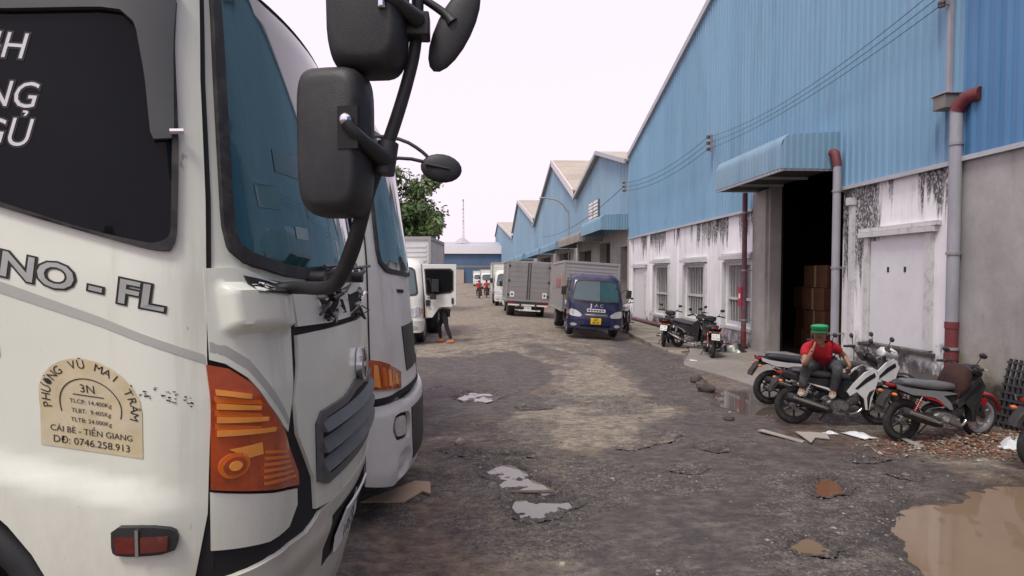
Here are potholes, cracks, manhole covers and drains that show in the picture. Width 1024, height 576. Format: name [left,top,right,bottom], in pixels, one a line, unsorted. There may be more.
pothole [779,531,845,559]
pothole [801,474,860,498]
pothole [451,389,508,404]
pothole [473,456,588,524]
